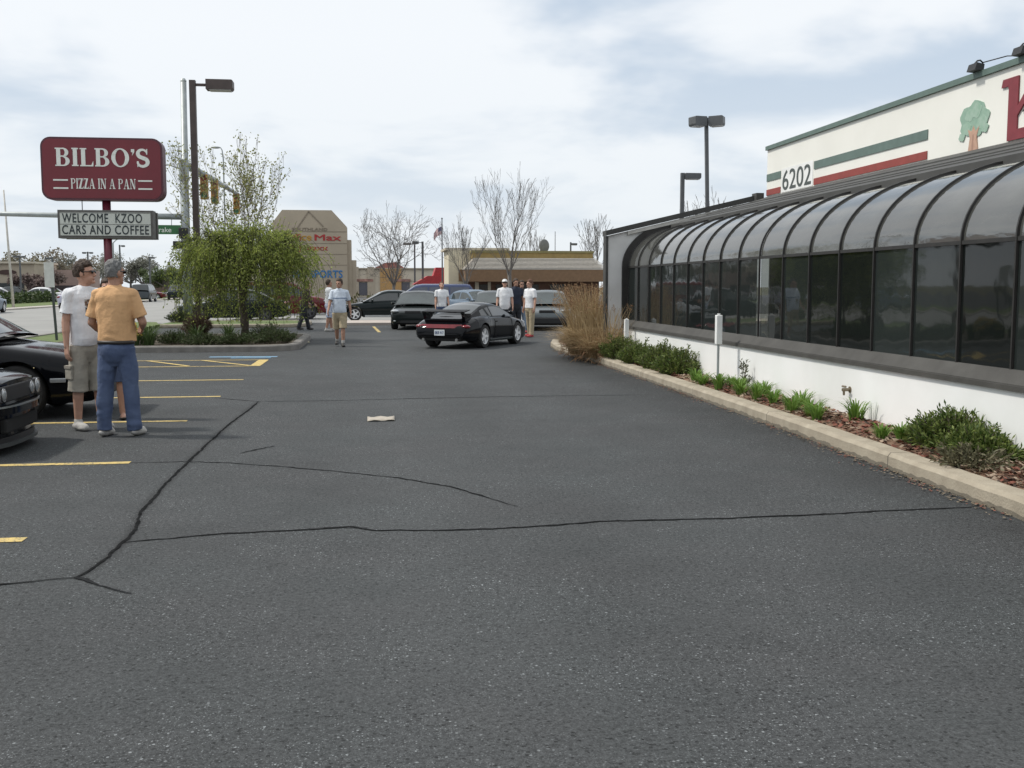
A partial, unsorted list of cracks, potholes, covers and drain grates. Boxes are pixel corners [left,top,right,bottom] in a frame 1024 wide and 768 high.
crack [0,395,968,593]
